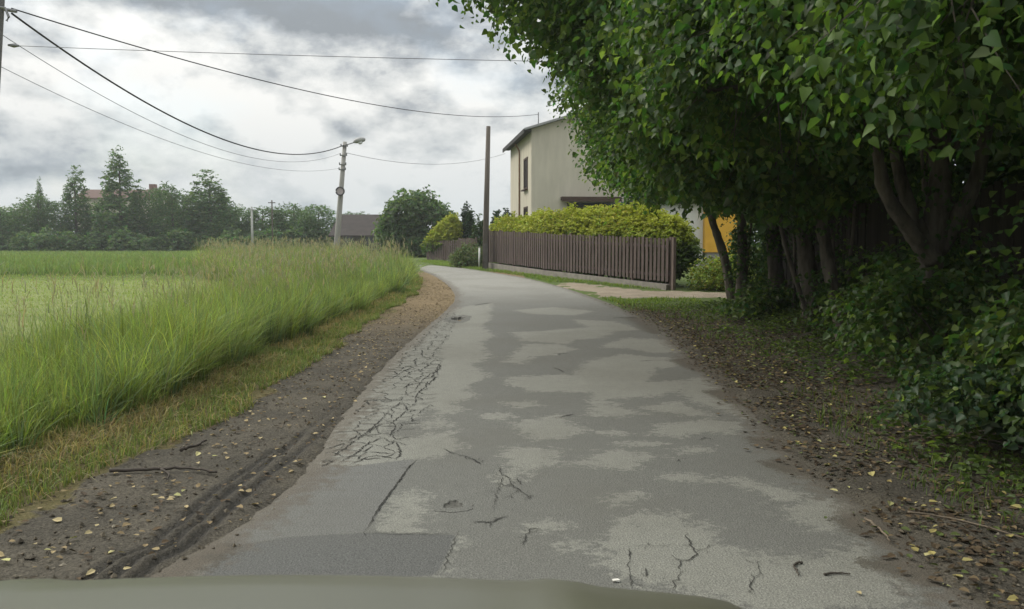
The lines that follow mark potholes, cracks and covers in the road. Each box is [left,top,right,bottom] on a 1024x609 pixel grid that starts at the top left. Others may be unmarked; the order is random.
crack [627,532,709,588]
pothole [433,496,474,512]
crack [443,449,542,571]
crack [322,311,456,465]
pothole [443,315,472,323]
